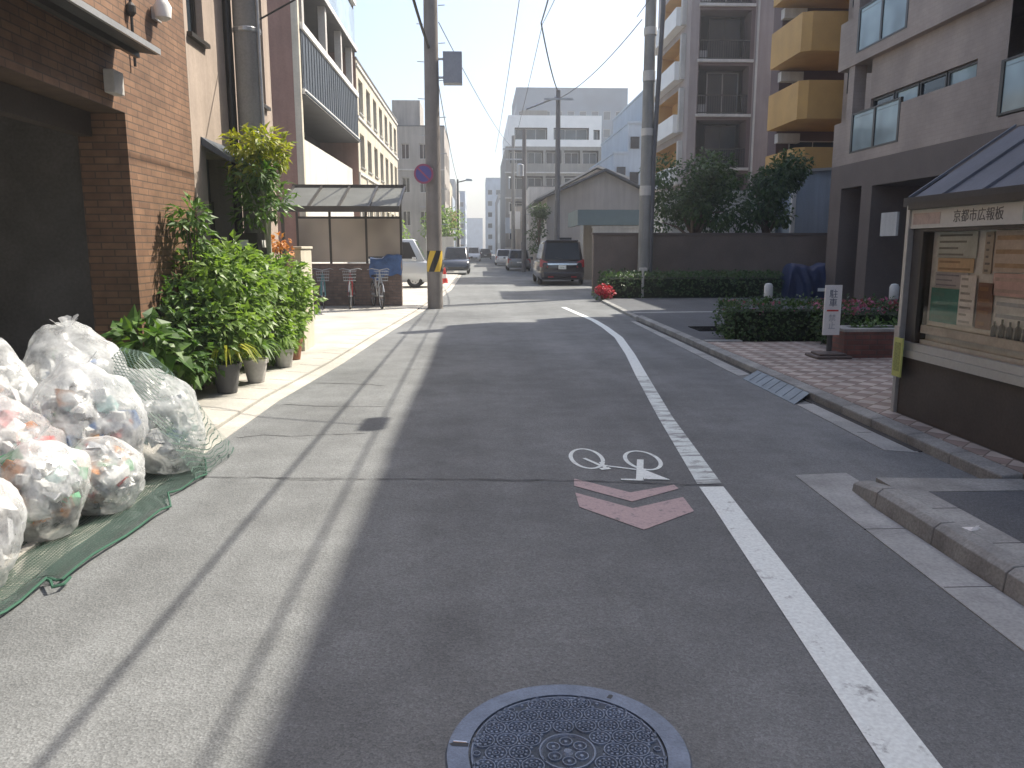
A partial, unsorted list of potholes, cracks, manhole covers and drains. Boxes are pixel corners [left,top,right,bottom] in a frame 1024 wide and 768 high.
manhole cover [445,684,692,768]
